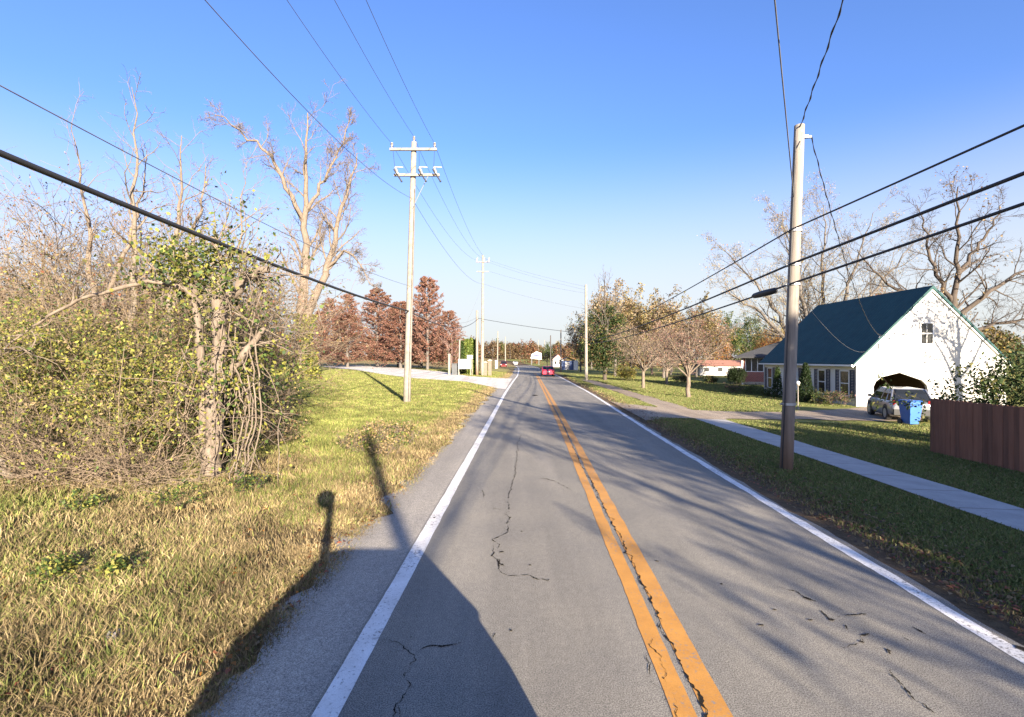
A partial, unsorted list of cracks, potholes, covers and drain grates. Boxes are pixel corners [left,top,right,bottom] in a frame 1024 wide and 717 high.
crack [888,627,934,713]
crack [385,636,462,717]
crack [482,442,549,580]
crack [781,587,869,649]
